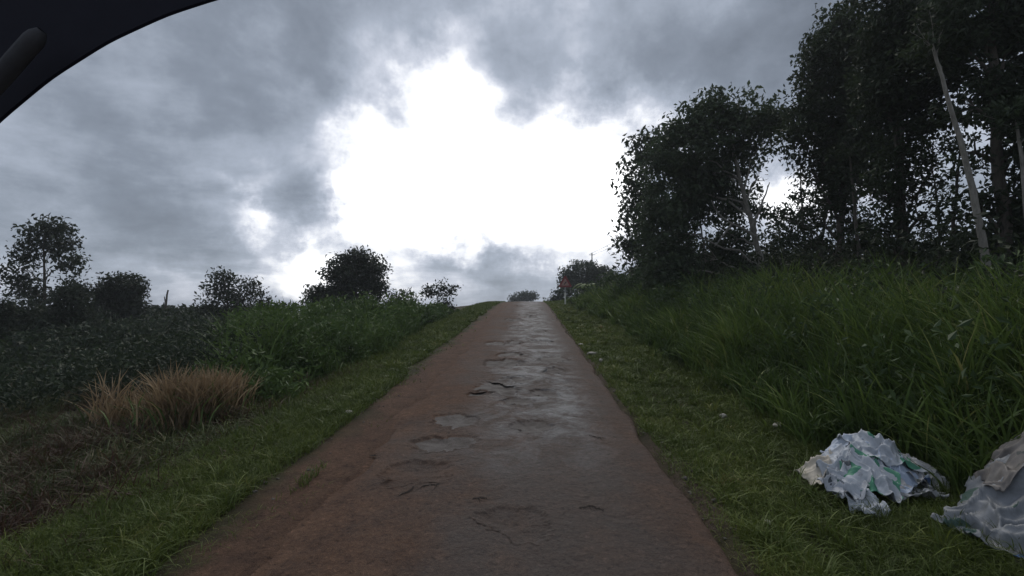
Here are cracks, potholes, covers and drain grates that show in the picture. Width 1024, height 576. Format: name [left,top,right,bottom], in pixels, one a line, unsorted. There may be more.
pothole [467,504,557,546]
pothole [480,358,530,368]
pothole [426,412,484,431]
pothole [404,434,487,454]
pothole [506,419,559,434]
pothole [465,378,525,397]
